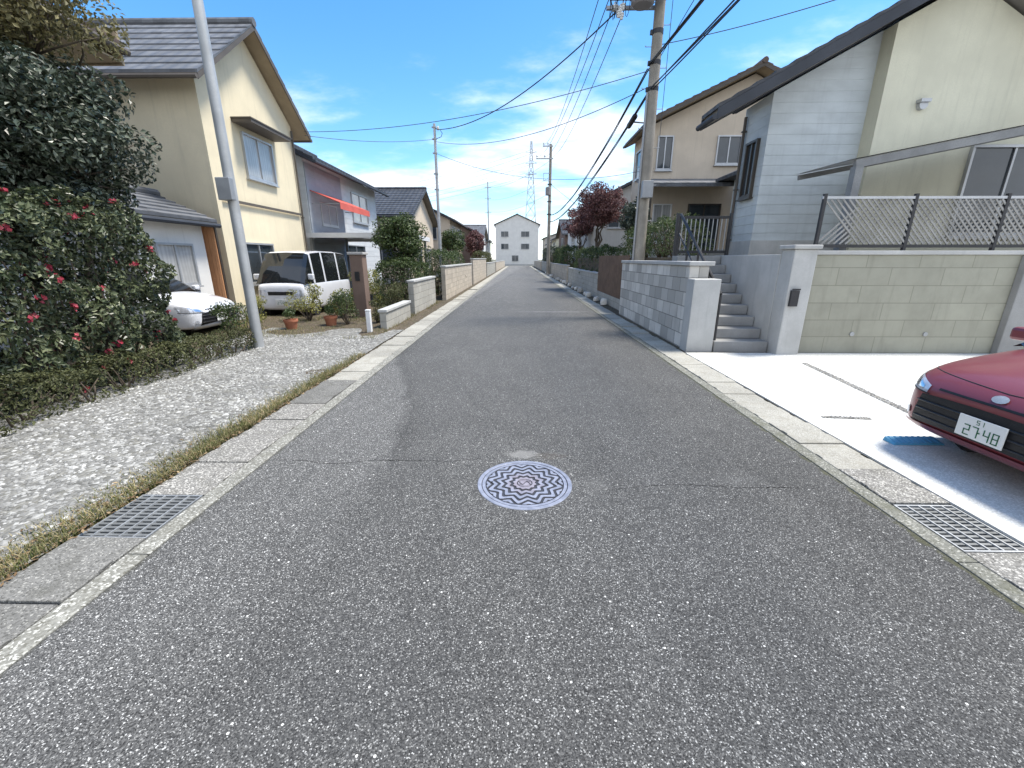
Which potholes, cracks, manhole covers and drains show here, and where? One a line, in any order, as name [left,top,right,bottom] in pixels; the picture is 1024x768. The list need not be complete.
manhole cover [477,461,572,510]
drain grate [893,505,1024,553]
drain grate [78,495,203,540]
